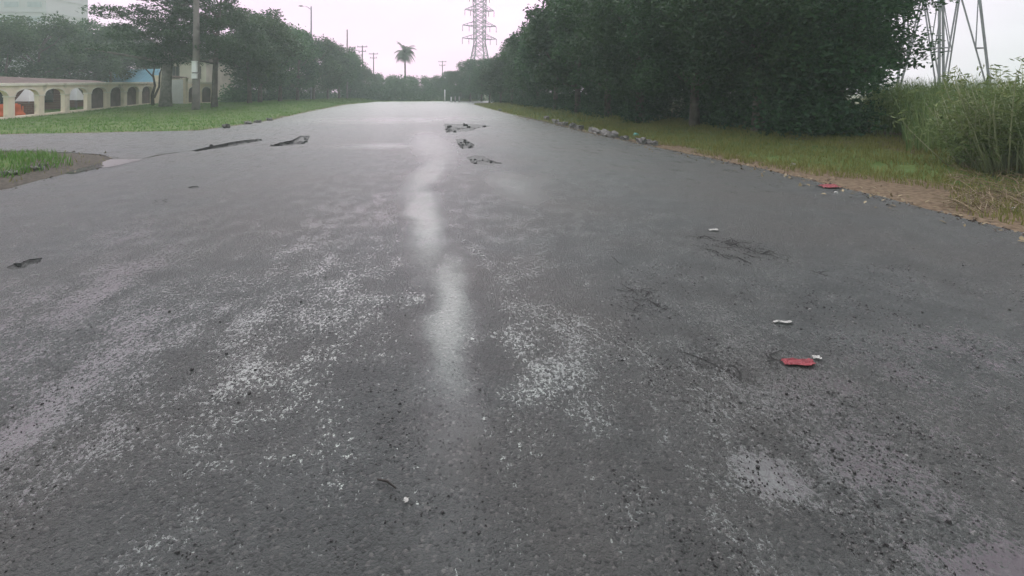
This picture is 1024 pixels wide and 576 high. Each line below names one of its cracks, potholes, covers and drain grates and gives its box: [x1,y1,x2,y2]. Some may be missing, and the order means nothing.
pothole [192,139,262,152]
crack [690,232,789,266]
pothole [7,258,42,270]
pothole [466,155,502,165]
pothole [456,139,474,149]
crack [665,341,796,389]
pothole [268,136,310,147]
crack [608,281,685,316]
pothole [444,123,489,133]
